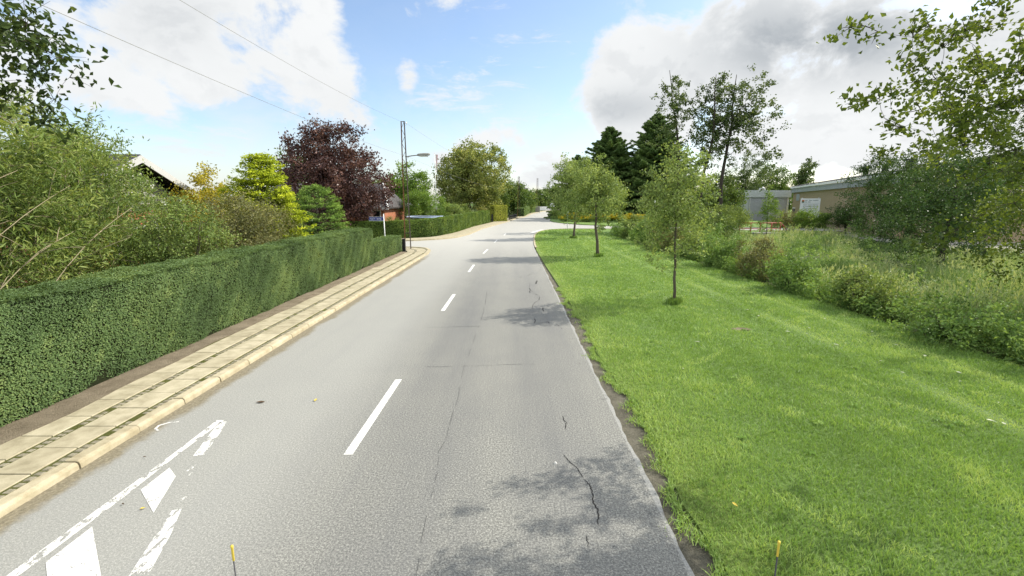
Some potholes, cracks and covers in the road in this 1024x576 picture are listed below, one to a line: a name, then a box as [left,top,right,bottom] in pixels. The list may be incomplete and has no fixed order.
crack [564,455,599,544]
